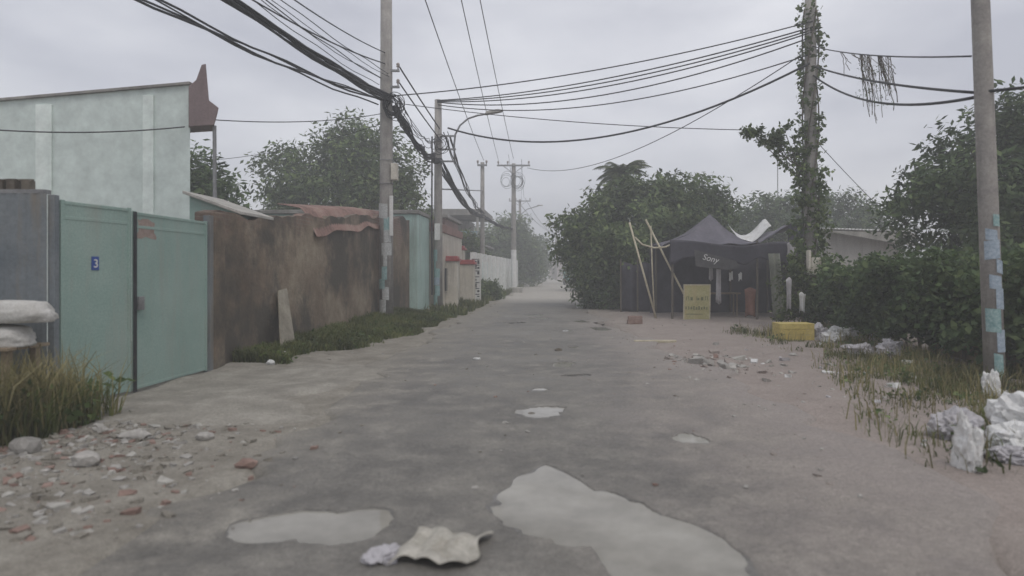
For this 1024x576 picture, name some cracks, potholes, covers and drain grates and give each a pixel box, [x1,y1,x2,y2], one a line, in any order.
pothole [455,457,791,576]
pothole [184,497,428,561]
pothole [658,430,724,447]
pothole [503,404,575,421]
